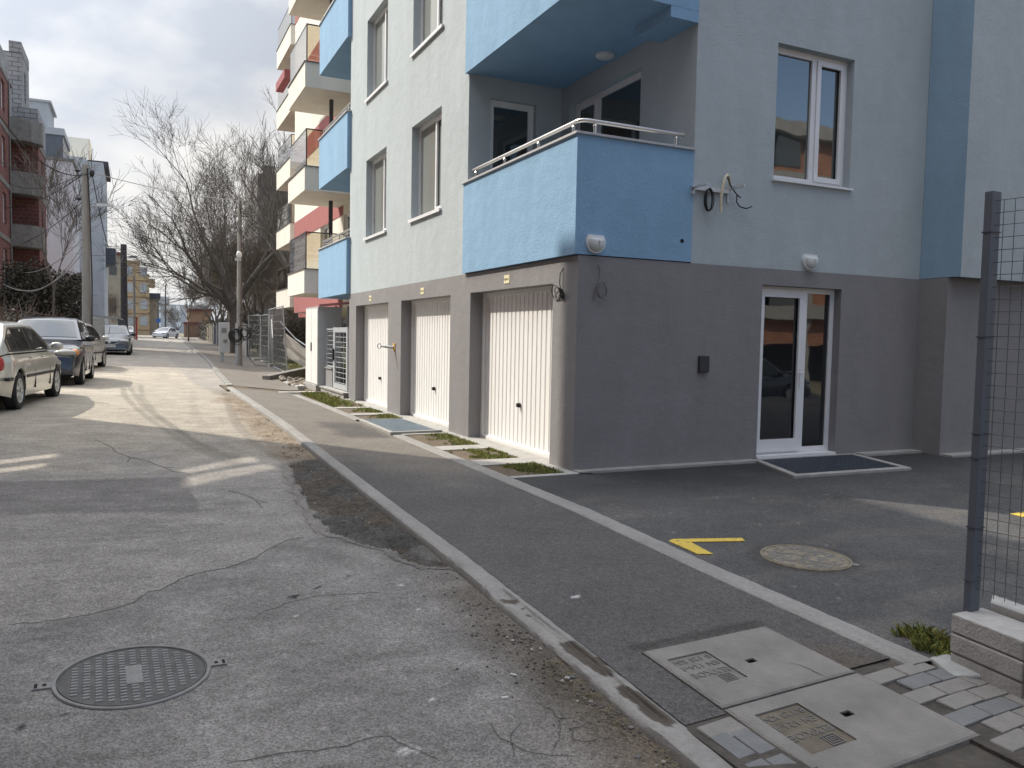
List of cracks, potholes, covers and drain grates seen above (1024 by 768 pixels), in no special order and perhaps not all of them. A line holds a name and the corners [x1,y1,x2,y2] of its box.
manhole cover [31,644,227,711]
utility cover [643,626,855,710]
manhole cover [760,544,860,572]
utility cover [724,673,980,768]
crack [491,708,598,759]
crack [227,736,436,764]
